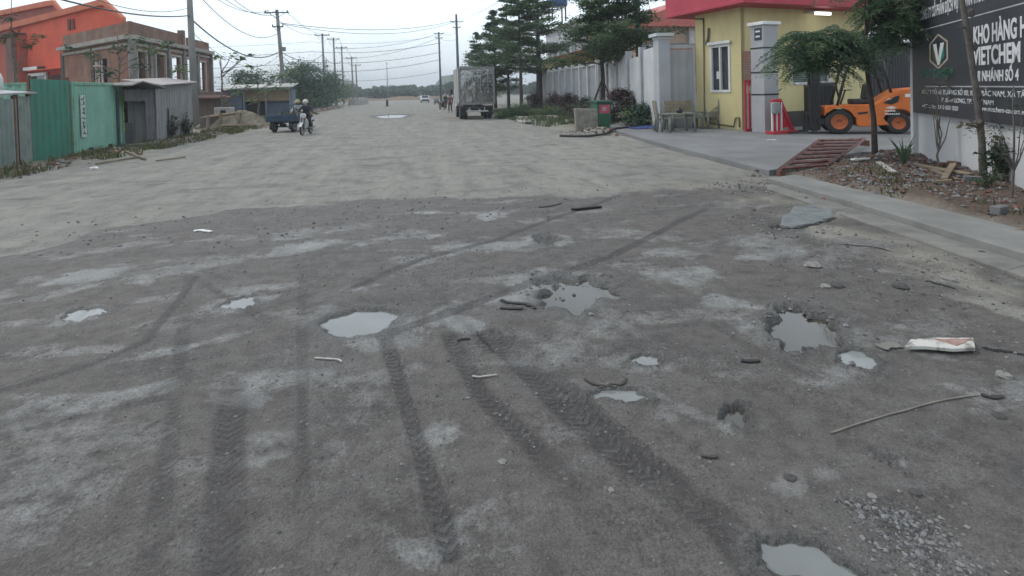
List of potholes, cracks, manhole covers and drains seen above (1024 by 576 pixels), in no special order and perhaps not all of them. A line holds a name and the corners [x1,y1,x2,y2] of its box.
pothole [627,352,664,369]
pothole [834,345,881,374]
pothole [748,531,875,576]
pothole [717,398,755,433]
pothole [529,271,634,319]
pothole [212,293,264,311]
pothole [584,385,654,404]
pothole [54,304,114,325]
pothole [759,300,854,355]
pothole [311,305,409,339]
